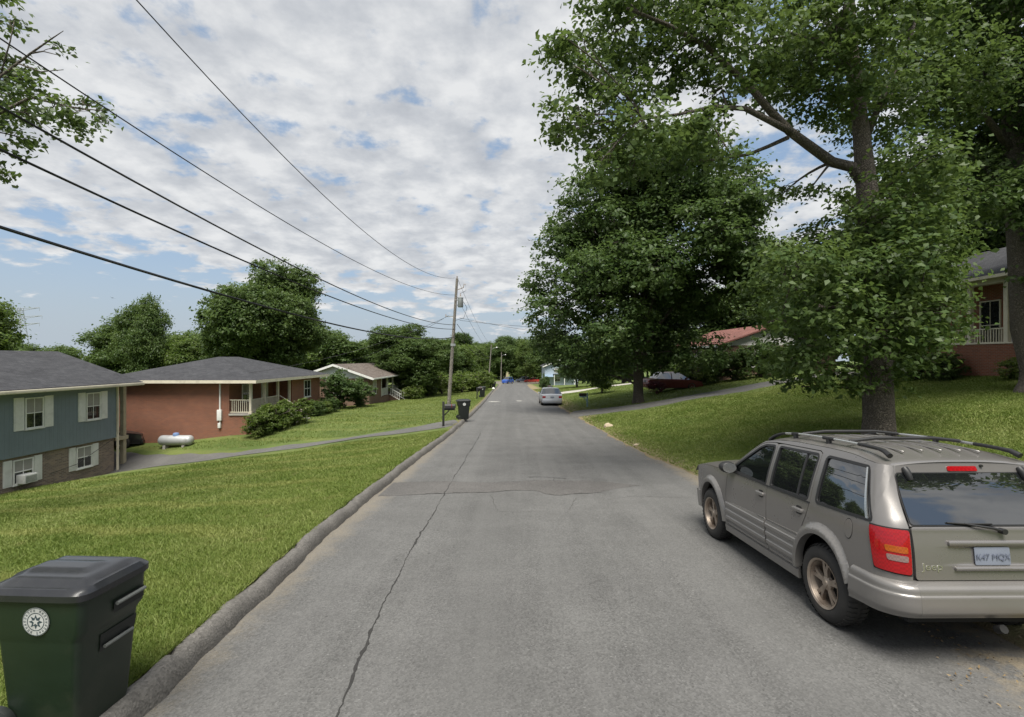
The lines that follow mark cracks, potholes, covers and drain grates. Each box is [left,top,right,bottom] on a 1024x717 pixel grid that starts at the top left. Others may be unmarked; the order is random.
crack [335,433,656,717]
